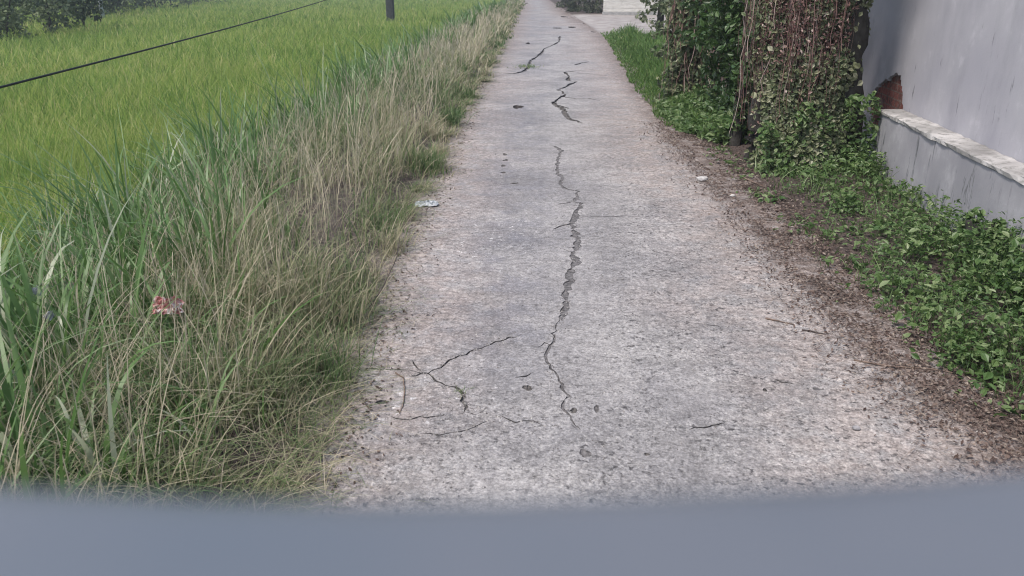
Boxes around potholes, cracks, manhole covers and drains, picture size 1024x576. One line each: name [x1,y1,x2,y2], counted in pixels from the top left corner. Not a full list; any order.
crack [551,62,606,123]
crack [508,36,561,74]
crack [515,146,636,429]
crack [364,337,548,450]
